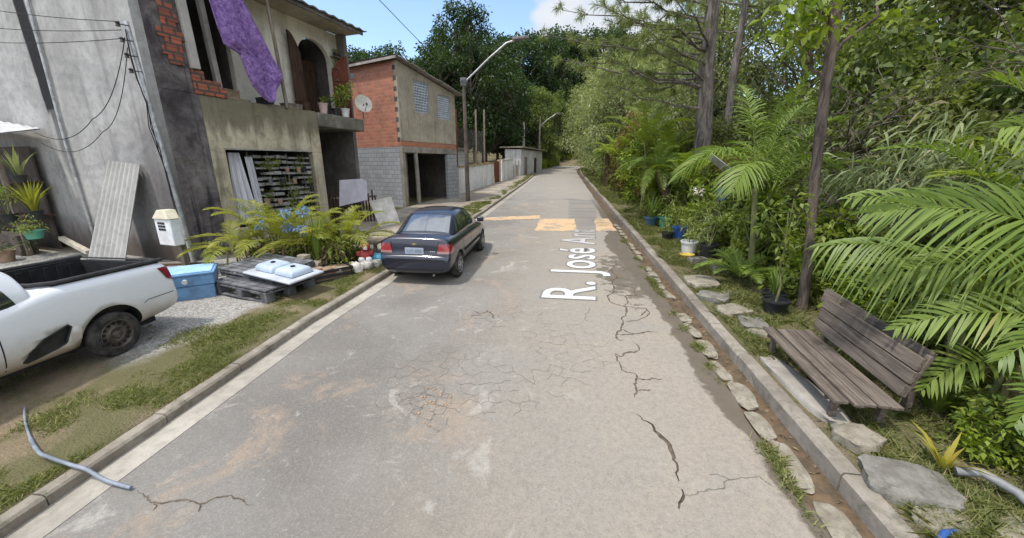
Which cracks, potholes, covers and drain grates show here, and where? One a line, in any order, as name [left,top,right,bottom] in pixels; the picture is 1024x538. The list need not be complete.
crack [366,261,771,509]
crack [137,490,252,511]
